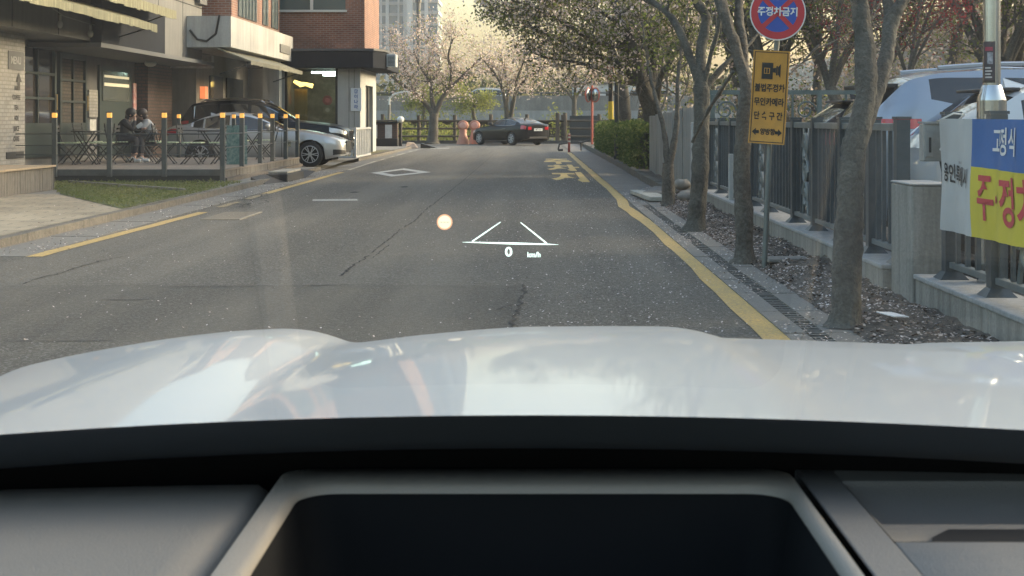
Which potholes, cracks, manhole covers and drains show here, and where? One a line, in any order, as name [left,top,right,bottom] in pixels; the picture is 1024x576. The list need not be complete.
crack [499,284,527,327]
crack [340,158,489,276]
